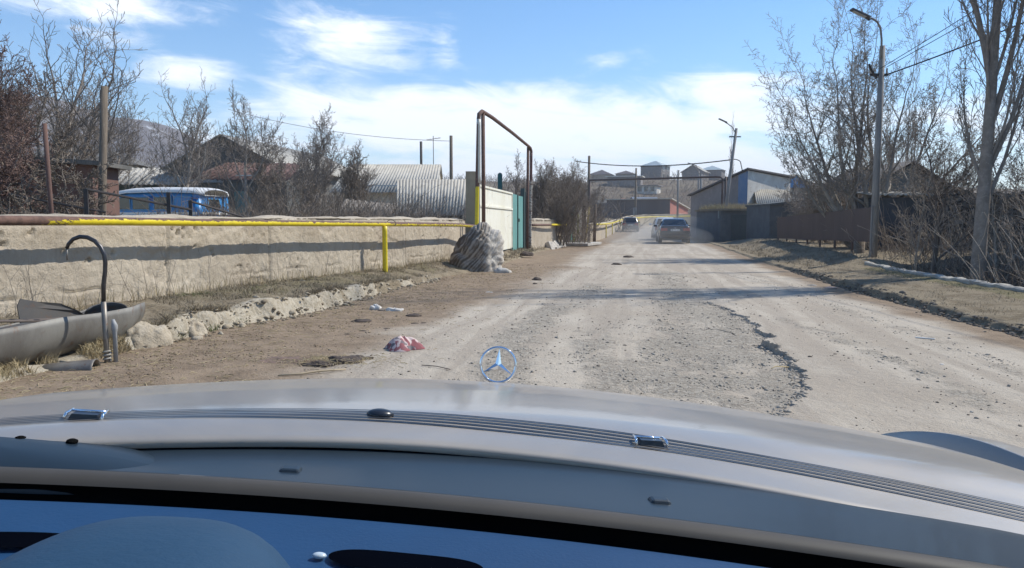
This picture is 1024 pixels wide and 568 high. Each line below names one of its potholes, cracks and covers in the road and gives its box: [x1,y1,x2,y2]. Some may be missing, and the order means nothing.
pothole [559,303,811,416]
